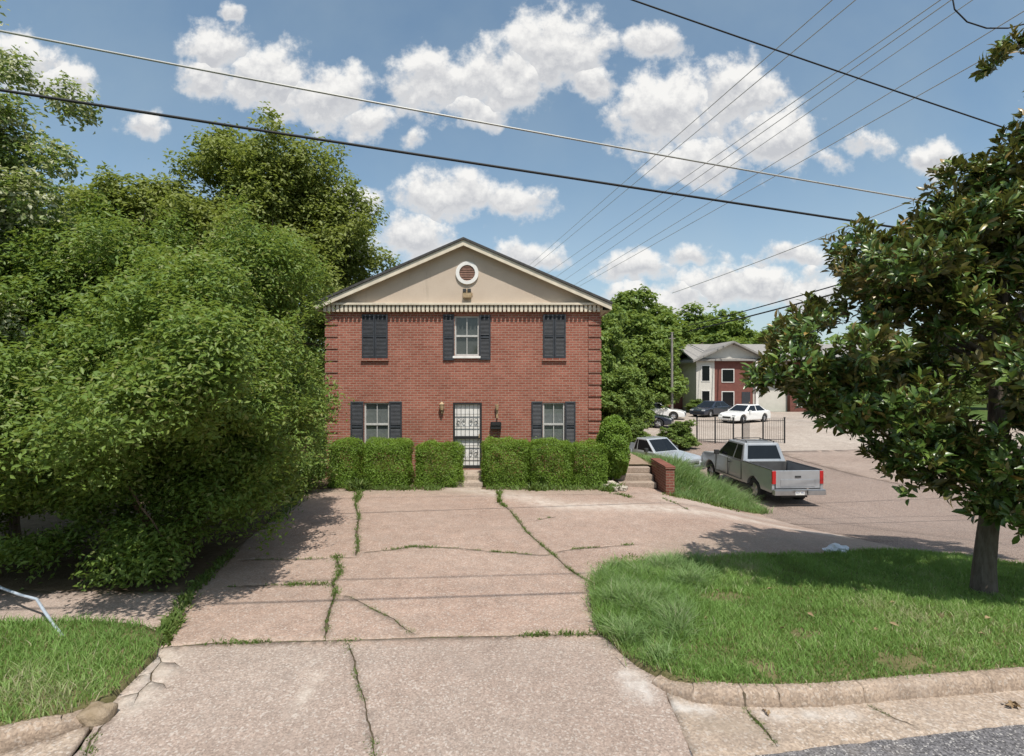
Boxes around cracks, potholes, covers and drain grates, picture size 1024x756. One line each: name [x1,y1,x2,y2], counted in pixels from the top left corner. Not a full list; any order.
crack [249,505,533,638]
crack [348,644,375,755]
crack [125,656,180,703]
crack [742,691,776,745]
